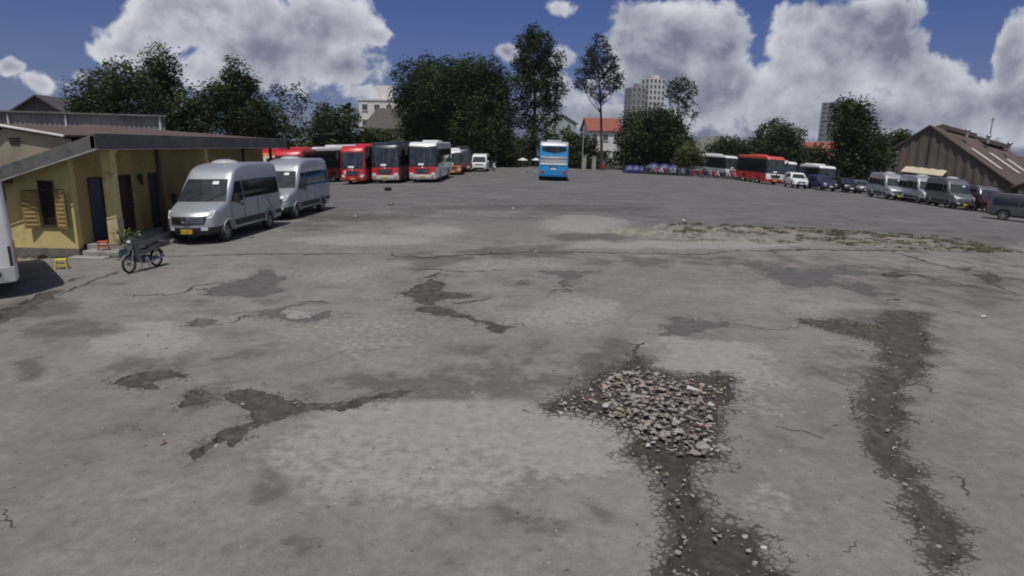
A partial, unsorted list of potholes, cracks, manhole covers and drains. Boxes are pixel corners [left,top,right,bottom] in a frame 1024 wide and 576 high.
pothole [111,370,189,390]
pothole [189,389,409,460]
pothole [546,356,790,576]
pothole [415,306,516,334]
crack [950,476,970,497]
pothole [800,312,968,570]
crack [56,270,120,297]
pothole [178,389,210,408]
pothole [401,275,474,306]
crack [773,398,856,439]
crack [125,281,232,297]
